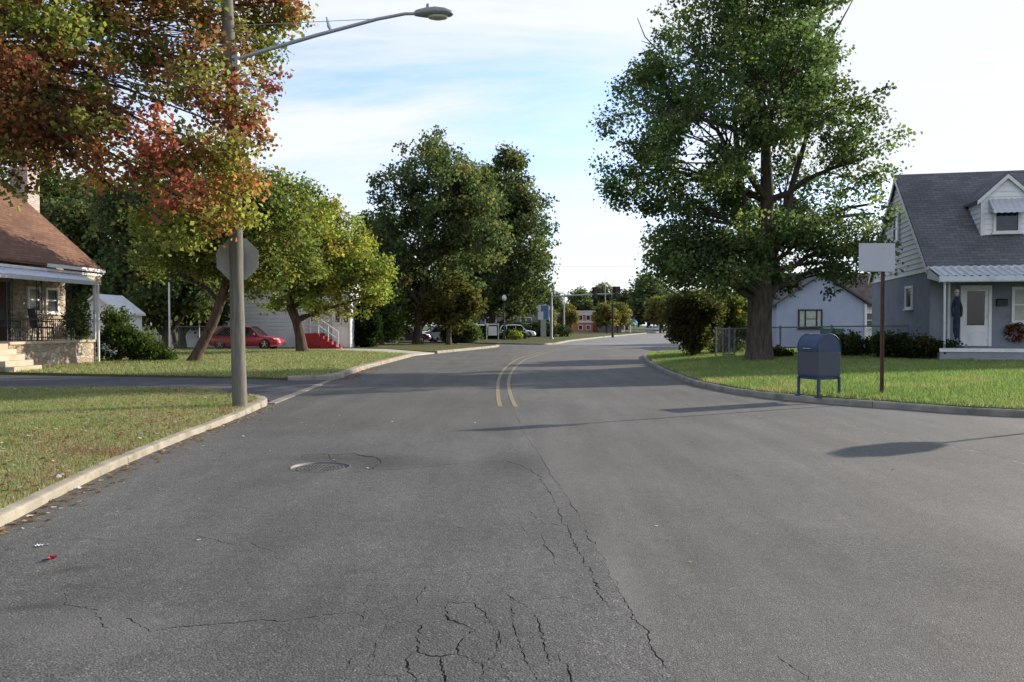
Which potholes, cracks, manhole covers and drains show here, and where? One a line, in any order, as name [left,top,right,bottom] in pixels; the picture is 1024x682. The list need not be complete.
crack [63,591,333,632]
manhole cover [289,462,351,473]
crack [300,453,609,682]
